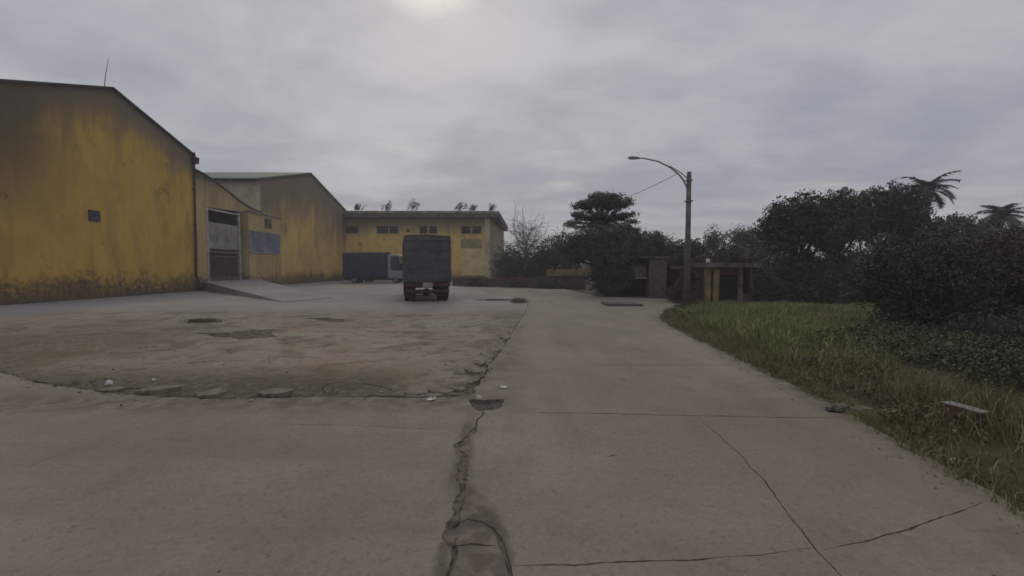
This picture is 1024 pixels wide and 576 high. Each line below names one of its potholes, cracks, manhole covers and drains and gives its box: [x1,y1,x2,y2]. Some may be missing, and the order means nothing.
pothole [469,399,504,413]
pothole [197,329,277,340]
crack [0,314,525,399]
crack [515,412,982,576]
